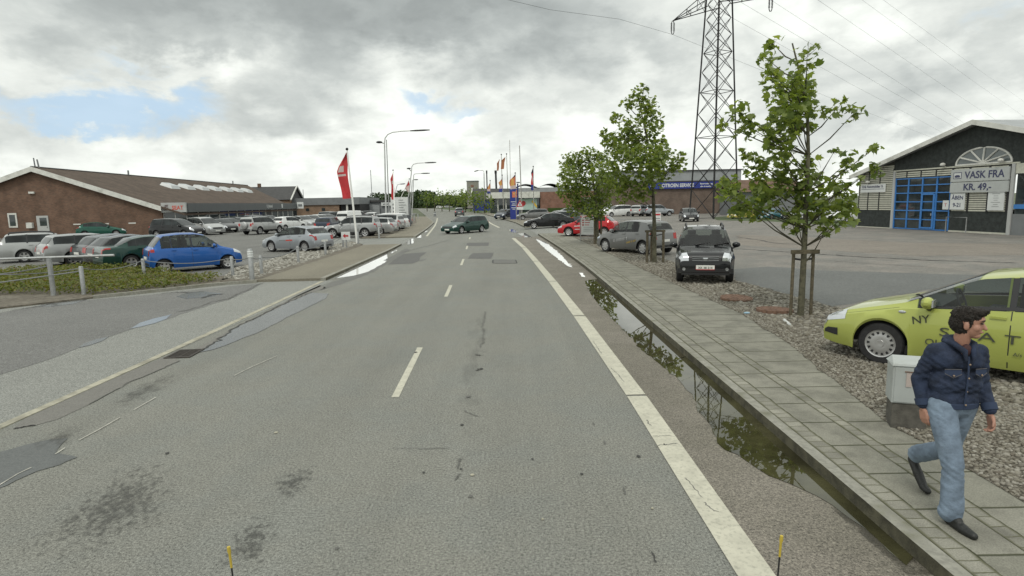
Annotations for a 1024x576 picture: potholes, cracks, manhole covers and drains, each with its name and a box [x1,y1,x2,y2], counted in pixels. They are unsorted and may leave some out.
drain grate [163,349,204,359]
